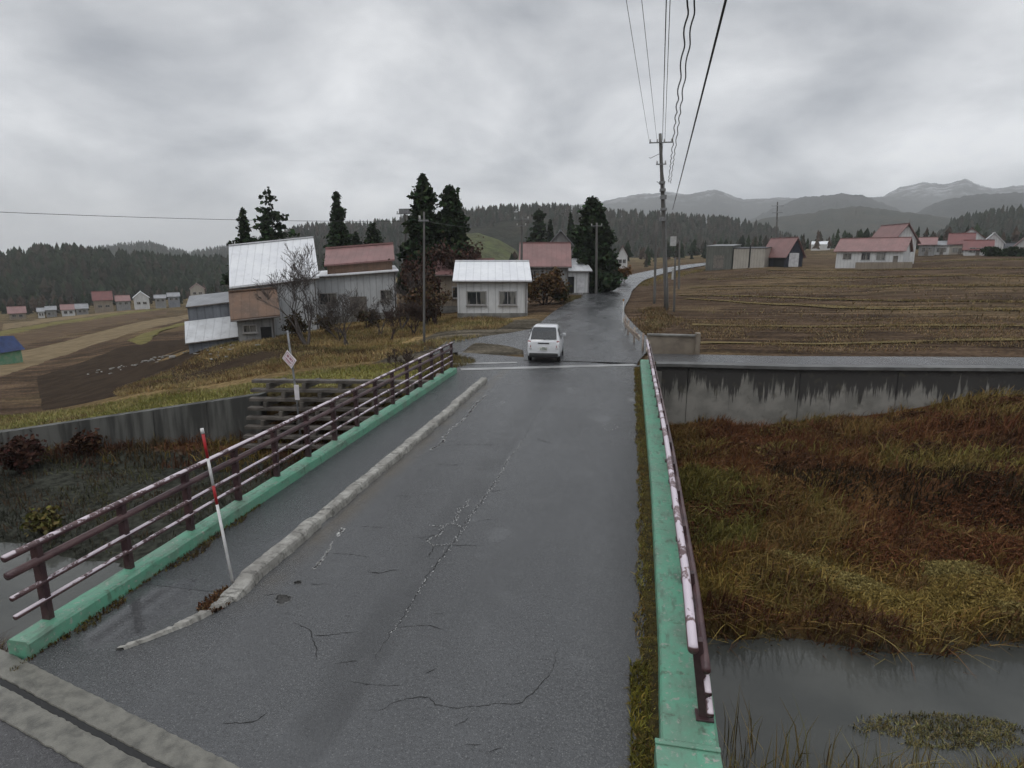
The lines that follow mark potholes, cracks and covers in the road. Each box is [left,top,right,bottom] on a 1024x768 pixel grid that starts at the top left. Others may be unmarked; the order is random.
crack [359,650,558,727]
pothole [273,594,294,606]
crack [375,398,549,657]
